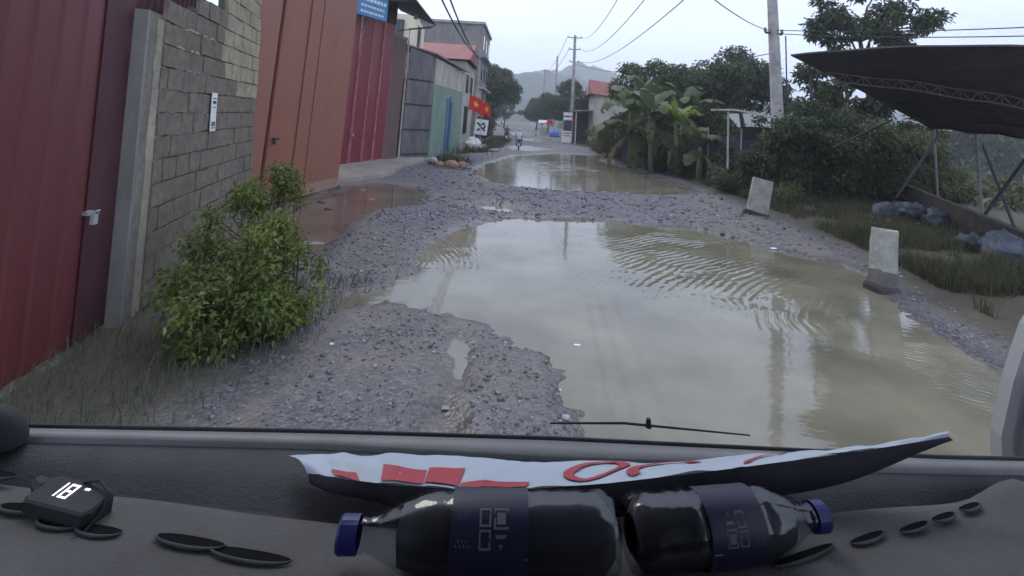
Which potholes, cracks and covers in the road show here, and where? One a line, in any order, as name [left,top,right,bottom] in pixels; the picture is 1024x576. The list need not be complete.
pothole [256,183,435,260]
pothole [464,152,700,195]
pothole [310,215,1006,456]
